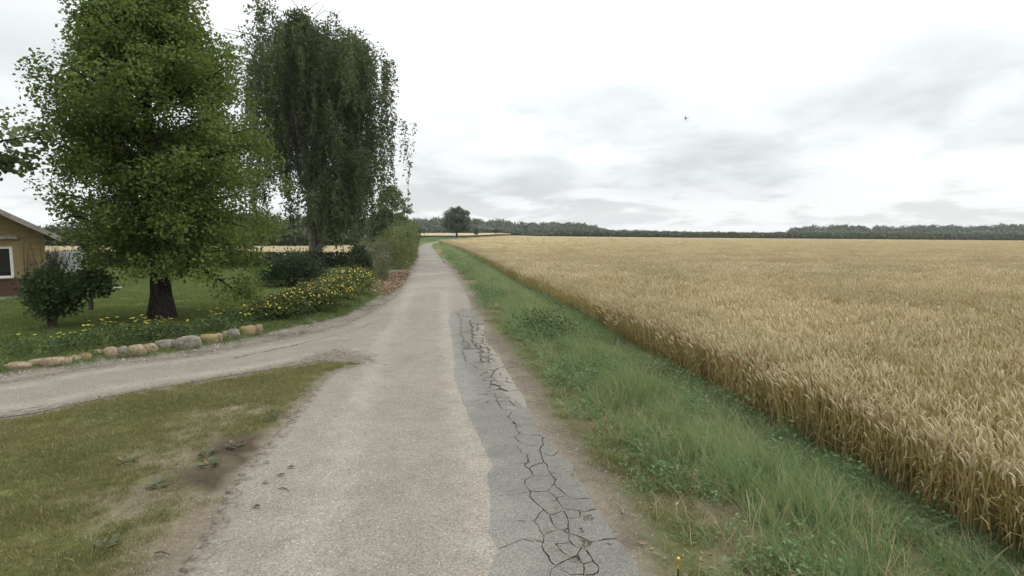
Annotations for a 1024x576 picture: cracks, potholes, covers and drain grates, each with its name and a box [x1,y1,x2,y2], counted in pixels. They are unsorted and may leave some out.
crack [457,313,616,576]
